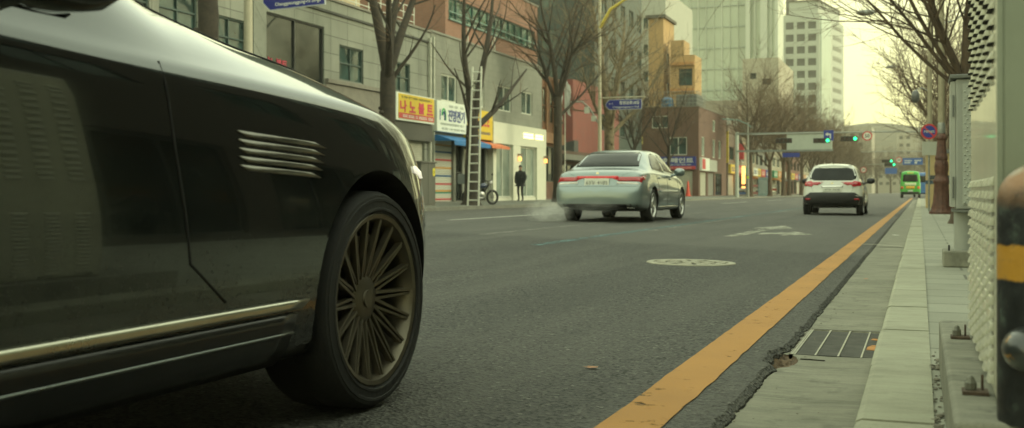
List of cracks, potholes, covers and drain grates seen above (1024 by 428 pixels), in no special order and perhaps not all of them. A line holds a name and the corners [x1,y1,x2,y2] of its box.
drain grate [789,329,880,361]
pothole [773,354,798,369]
